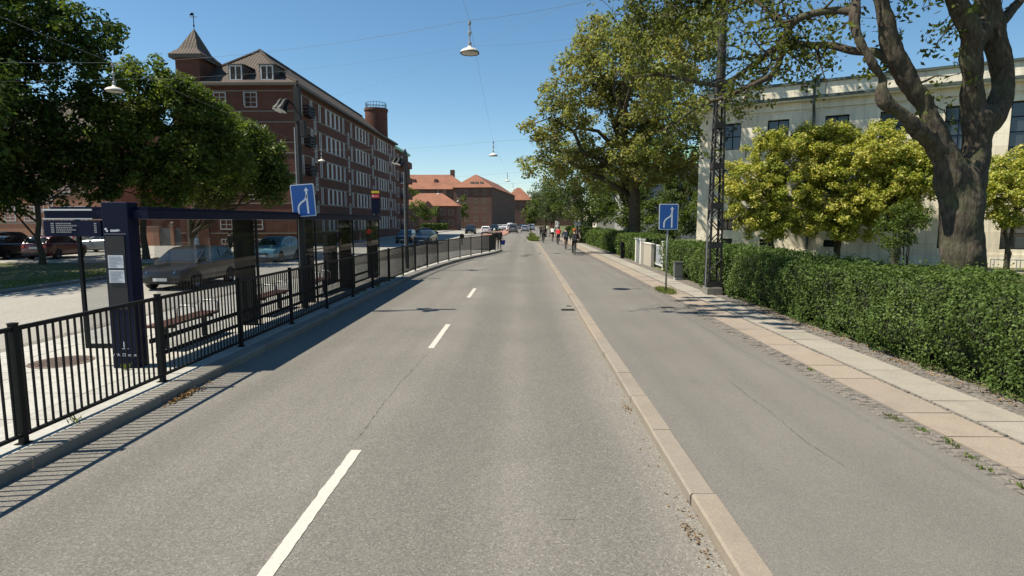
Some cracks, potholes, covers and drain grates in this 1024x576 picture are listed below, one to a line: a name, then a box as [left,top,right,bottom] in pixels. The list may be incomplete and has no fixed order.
manhole cover [26,355,95,369]
